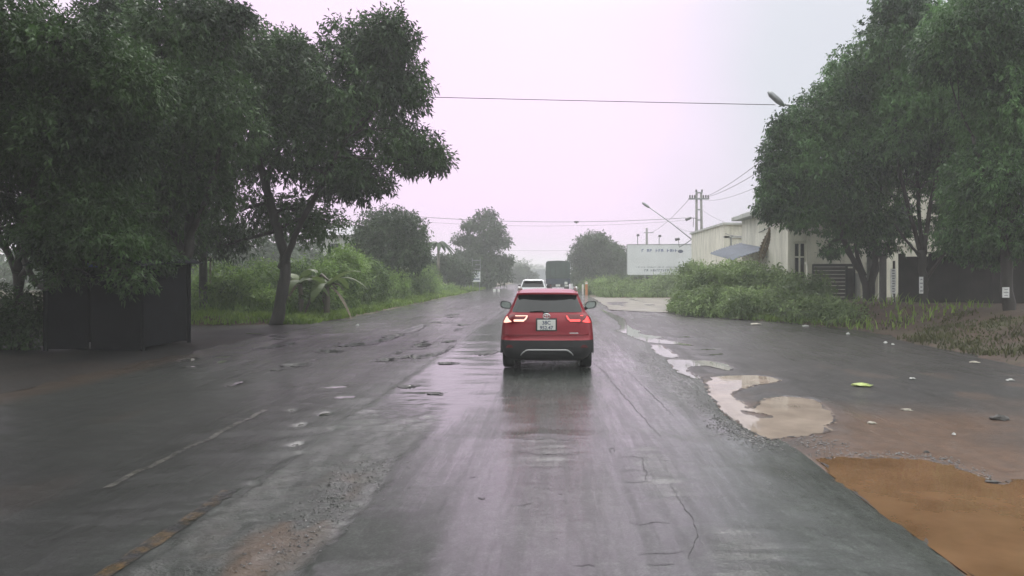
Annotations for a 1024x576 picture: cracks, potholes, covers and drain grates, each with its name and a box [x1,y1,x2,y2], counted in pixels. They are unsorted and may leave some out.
crack [609,447,699,565]
pothole [666,358,735,379]
crack [596,364,674,437]
pothole [408,344,456,359]
pothole [700,375,837,440]
